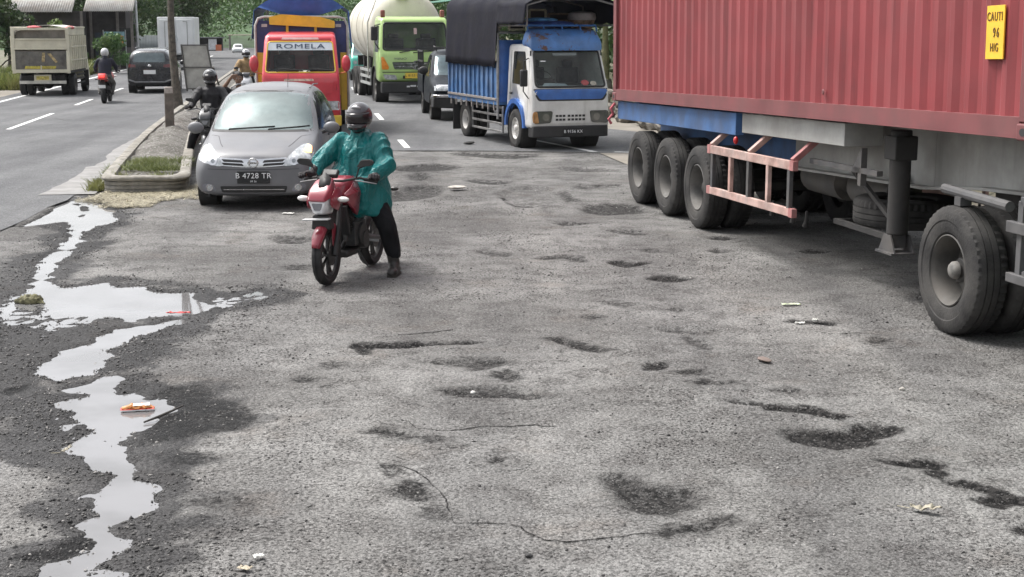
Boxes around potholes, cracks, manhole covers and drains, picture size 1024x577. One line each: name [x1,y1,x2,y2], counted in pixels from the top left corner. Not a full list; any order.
pothole [472,365,541,383]
pothole [694,393,873,427]
pothole [388,352,532,376]
pothole [0,379,54,401]
crack [408,419,554,431]
crack [394,464,677,543]
pothole [407,380,572,407]
pothole [527,334,633,358]
pothole [594,257,674,271]
